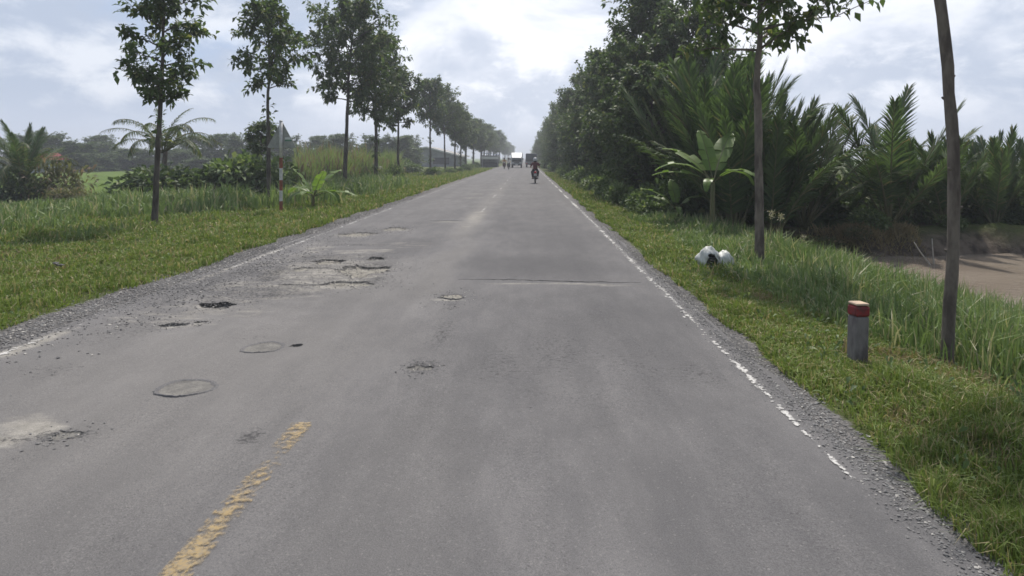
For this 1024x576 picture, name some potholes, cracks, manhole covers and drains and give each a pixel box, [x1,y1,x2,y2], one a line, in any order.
pothole [199,301,237,309]
pothole [49,430,82,440]
